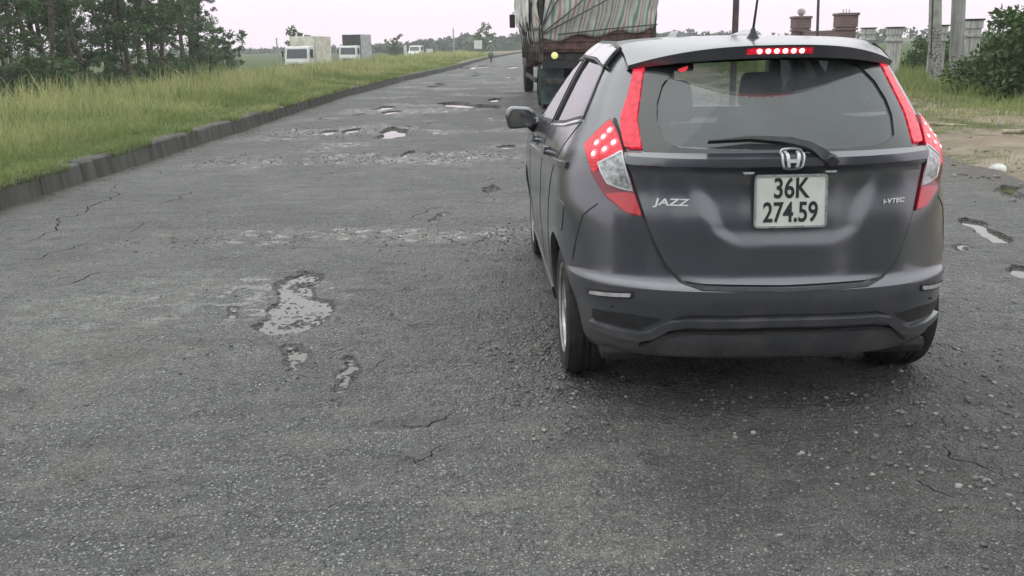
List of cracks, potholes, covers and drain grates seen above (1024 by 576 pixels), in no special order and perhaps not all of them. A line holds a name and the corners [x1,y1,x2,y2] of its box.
pothole [372,127,409,139]
pothole [276,343,313,372]
crack [12,185,120,259]
pothole [250,269,338,336]
crack [397,413,450,428]
pothole [481,184,502,194]
pothole [330,355,365,394]
crack [915,445,1001,499]
crack [402,445,444,464]
pothole [958,217,1015,243]
